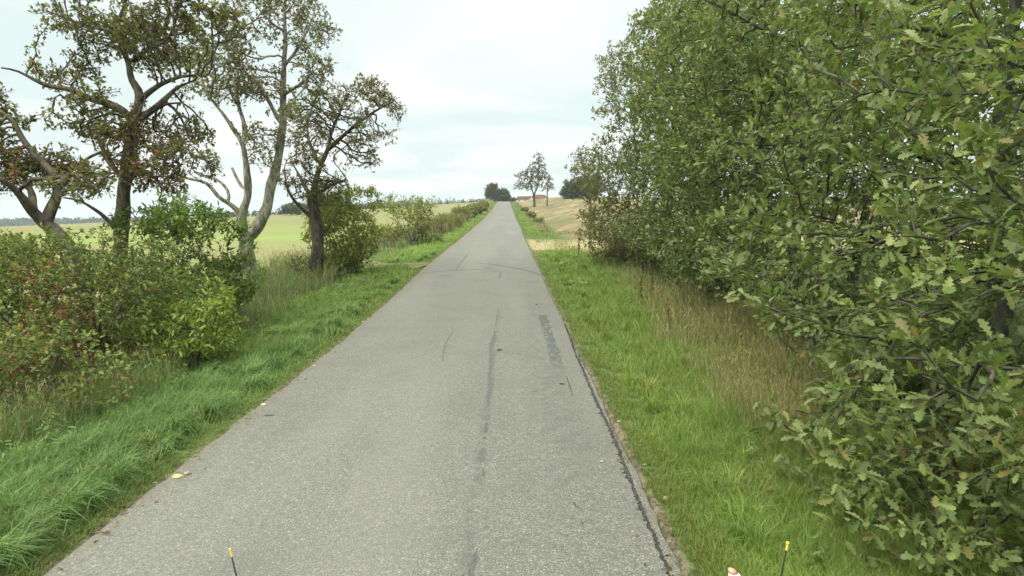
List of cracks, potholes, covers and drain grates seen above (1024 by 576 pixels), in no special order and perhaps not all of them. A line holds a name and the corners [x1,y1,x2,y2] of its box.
crack [564,324,673,576]
crack [461,551,479,576]
